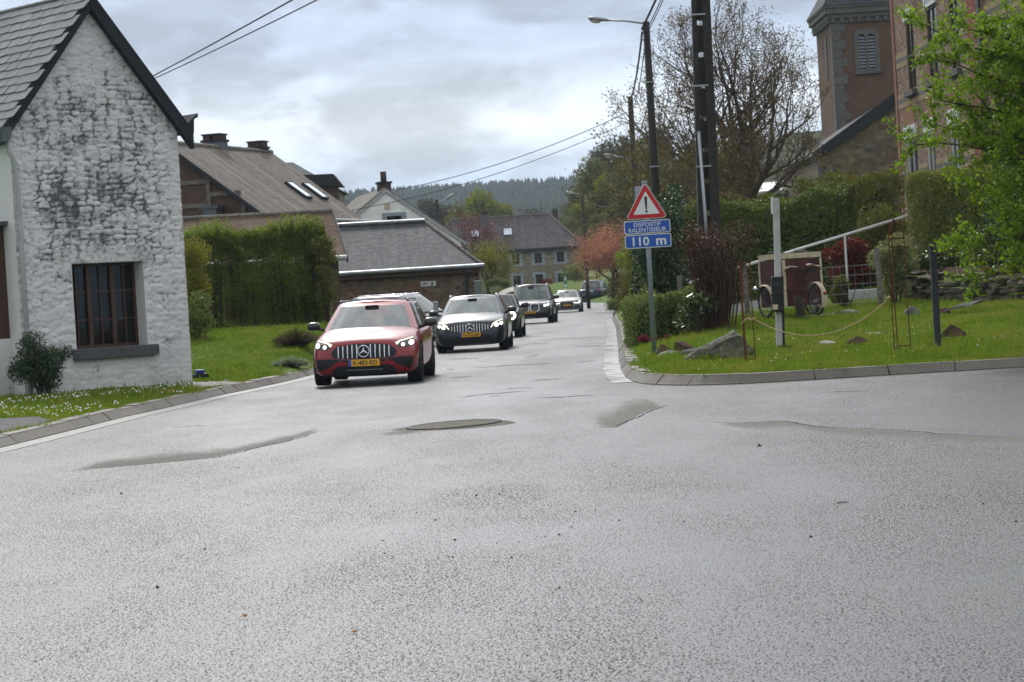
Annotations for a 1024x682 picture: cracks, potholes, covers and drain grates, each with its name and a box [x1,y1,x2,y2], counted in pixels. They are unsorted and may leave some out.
manhole cover [393,419,516,431]
